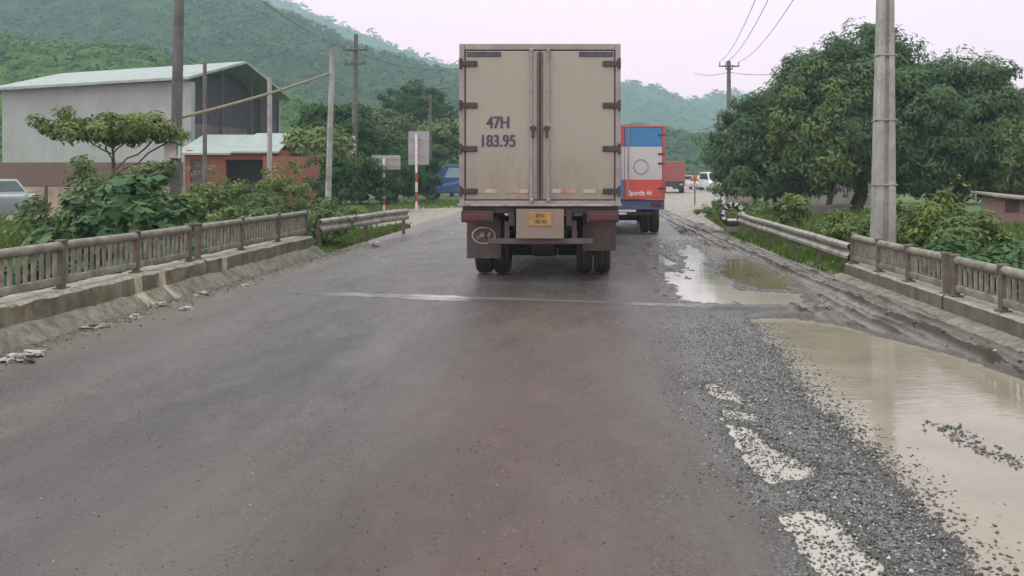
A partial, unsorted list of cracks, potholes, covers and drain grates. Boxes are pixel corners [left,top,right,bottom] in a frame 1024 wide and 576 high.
pothole [650,252,679,265]
pothole [750,313,1024,576]
pothole [664,243,825,305]
